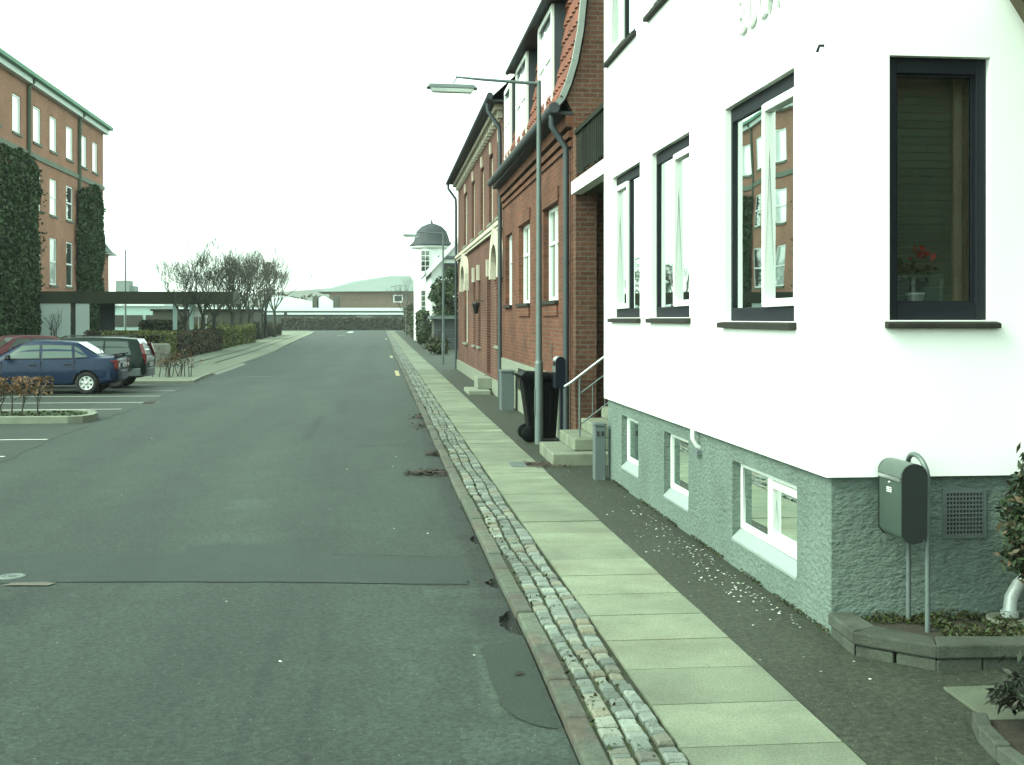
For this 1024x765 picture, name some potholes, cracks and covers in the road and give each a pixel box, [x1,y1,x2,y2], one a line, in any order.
pothole [499,611,522,635]
